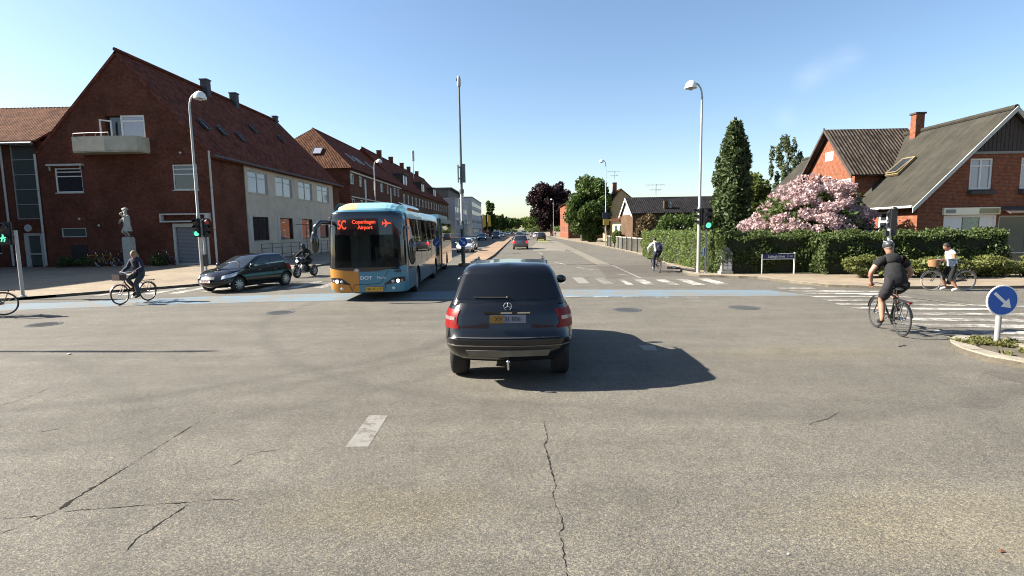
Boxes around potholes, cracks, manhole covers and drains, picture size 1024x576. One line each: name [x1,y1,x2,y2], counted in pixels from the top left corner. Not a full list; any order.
crack [3,410,233,550]
crack [544,425,568,576]
